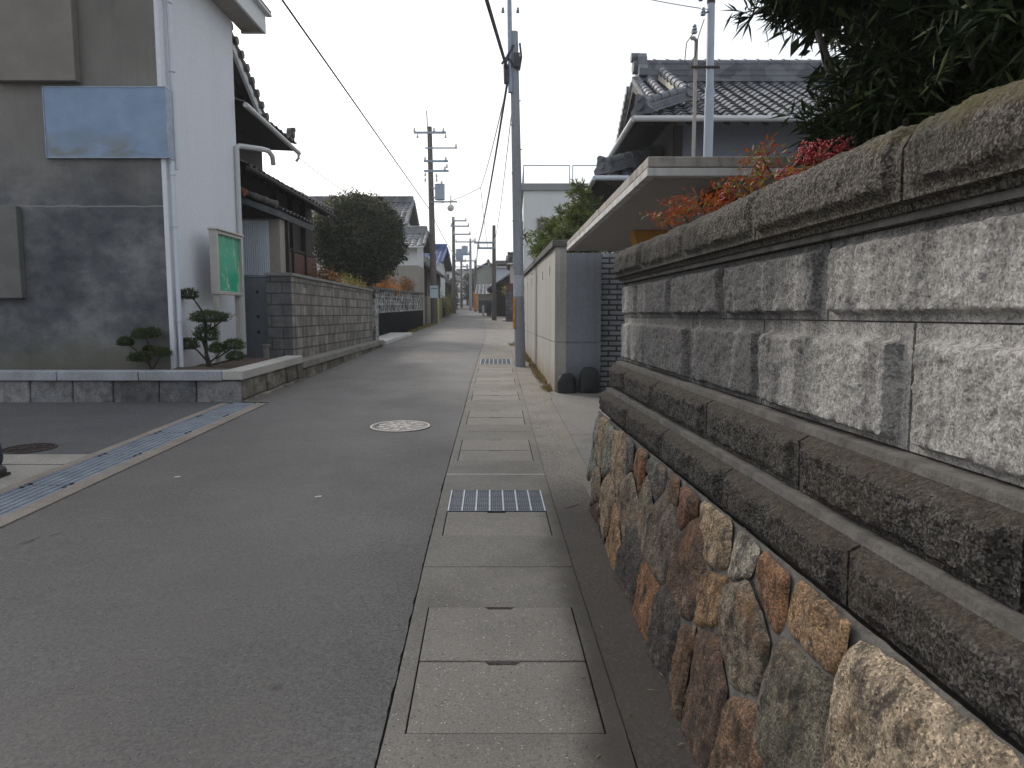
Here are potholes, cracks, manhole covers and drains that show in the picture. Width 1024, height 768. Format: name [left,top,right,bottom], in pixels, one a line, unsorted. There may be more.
manhole cover [369,420,431,432]
drain grate [447,490,546,513]
manhole cover [2,443,58,454]
drain grate [25,455,139,486]
drain grate [101,432,190,455]
drain grate [198,403,255,416]
drain grate [158,416,226,433]
drain grate [0,485,71,517]
